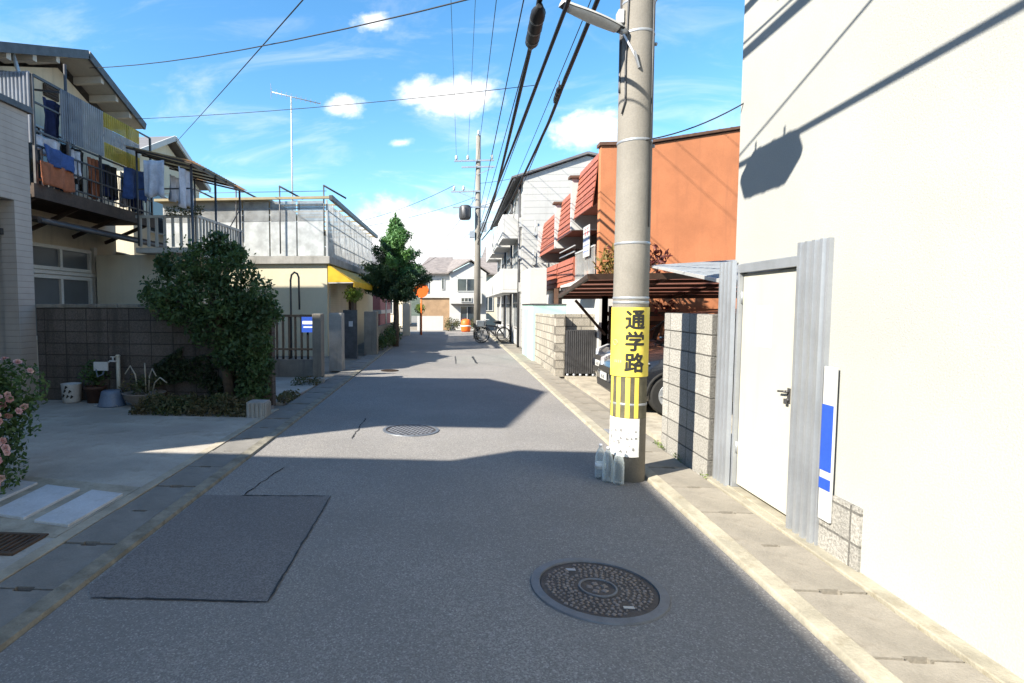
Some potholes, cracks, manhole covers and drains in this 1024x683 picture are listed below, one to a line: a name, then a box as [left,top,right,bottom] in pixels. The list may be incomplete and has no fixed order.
manhole cover [383,424,439,437]
drain grate [0,532,49,556]
manhole cover [530,558,671,626]
